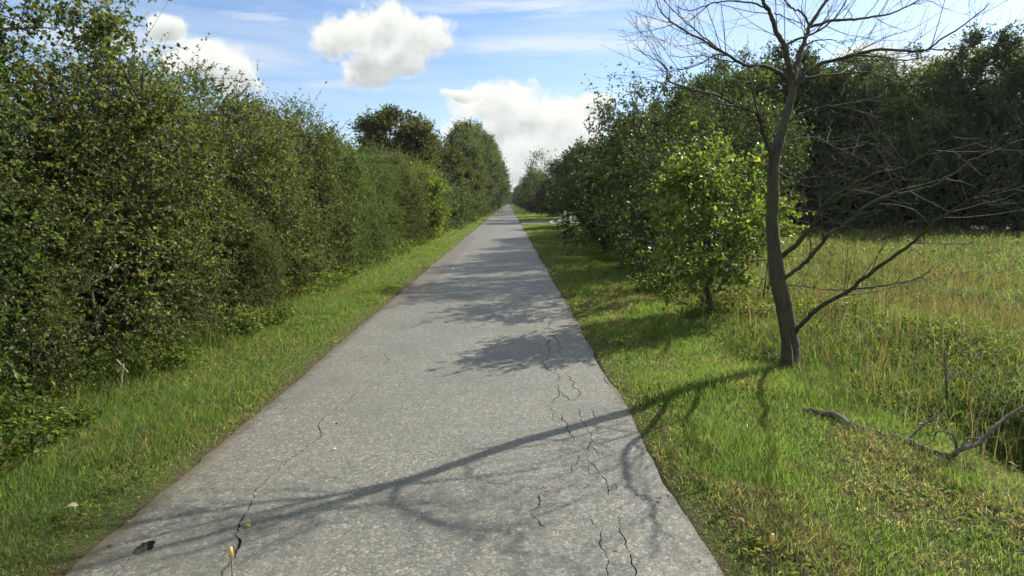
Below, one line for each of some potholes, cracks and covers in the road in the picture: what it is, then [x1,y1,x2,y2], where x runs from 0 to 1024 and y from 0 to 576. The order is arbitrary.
crack [590,517,637,576]
crack [544,321,617,495]
crack [221,381,375,576]
